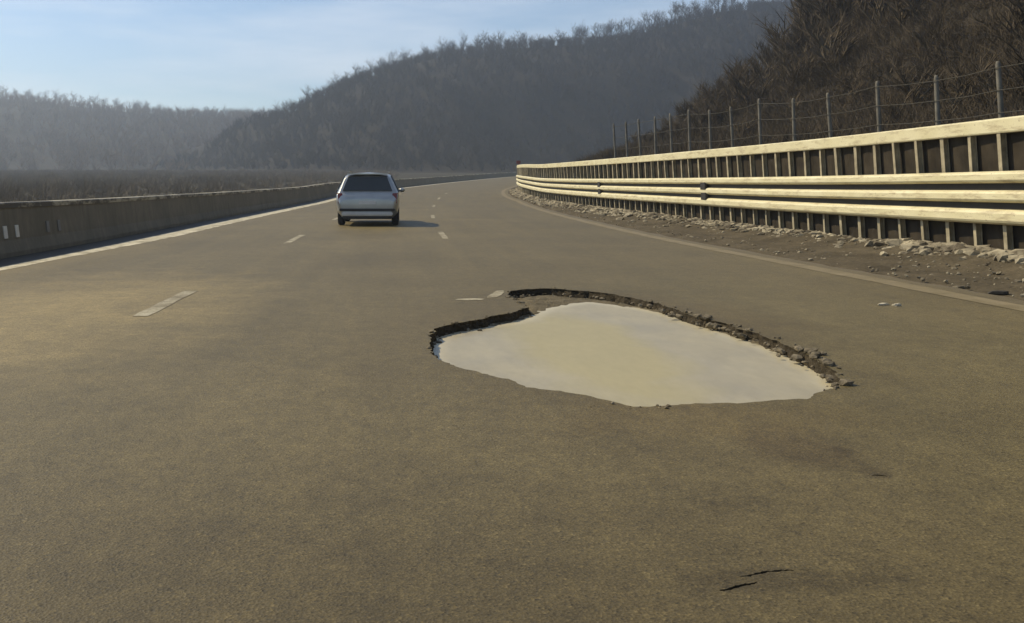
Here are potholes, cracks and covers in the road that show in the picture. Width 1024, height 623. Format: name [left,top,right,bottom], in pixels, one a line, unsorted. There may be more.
crack [719,569,794,591]
pothole [426,287,855,409]
